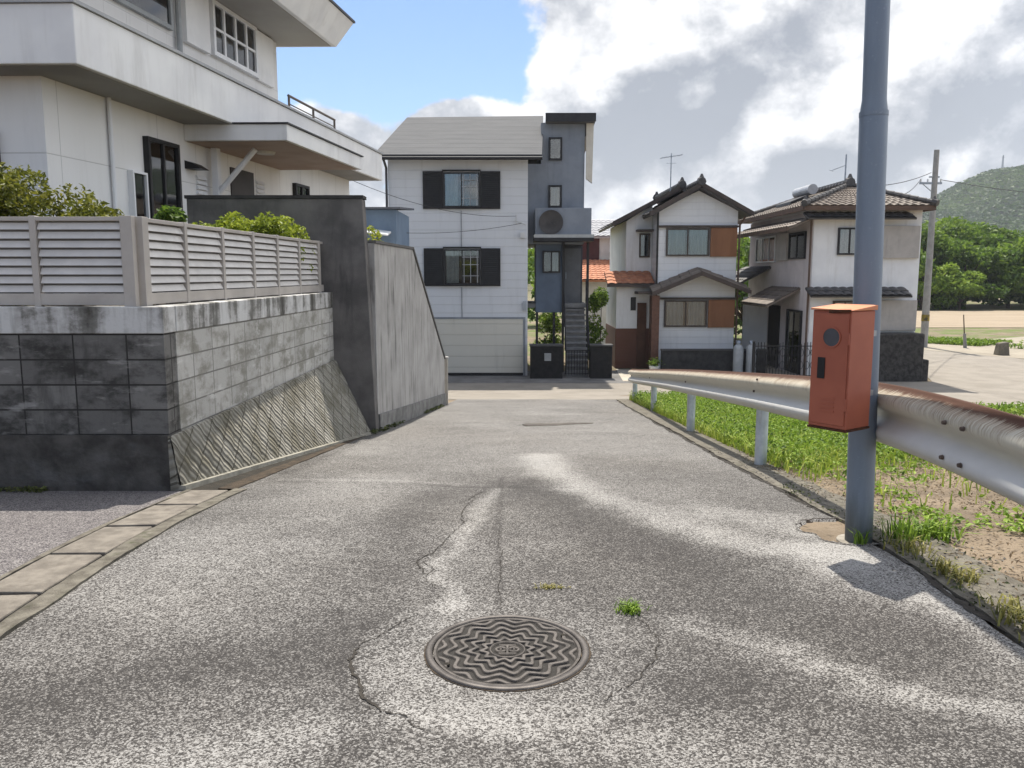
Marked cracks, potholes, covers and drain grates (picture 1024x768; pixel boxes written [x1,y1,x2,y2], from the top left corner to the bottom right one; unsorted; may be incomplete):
crack [603,615,660,701]
manhole cover [424,615,592,692]
crack [416,491,486,587]
crack [343,613,442,730]
